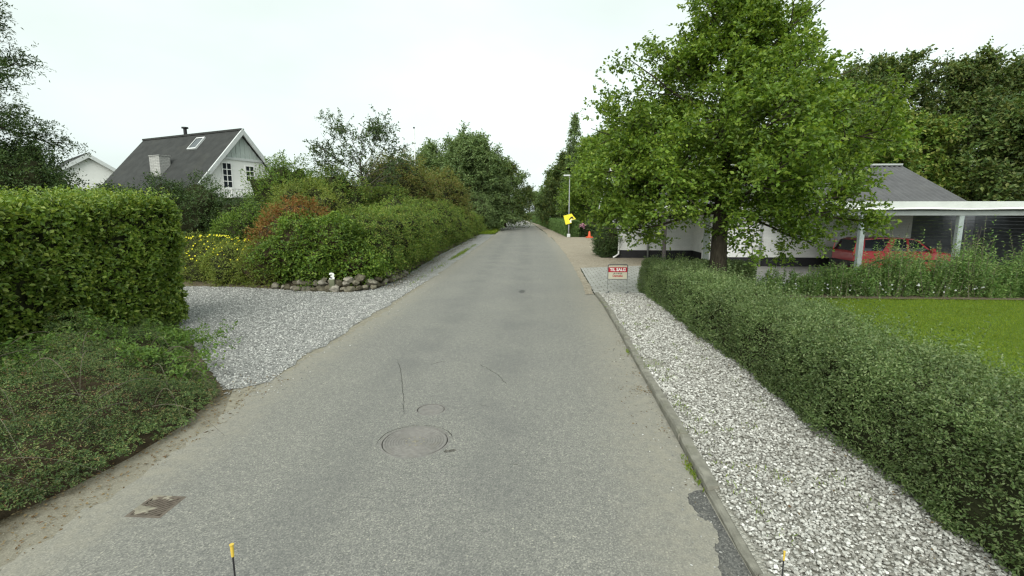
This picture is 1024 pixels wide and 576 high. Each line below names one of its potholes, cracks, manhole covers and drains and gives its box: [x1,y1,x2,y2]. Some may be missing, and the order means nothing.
drain grate [124,495,187,518]
manhole cover [416,404,446,416]
manhole cover [379,426,450,458]
crack [378,360,453,441]
